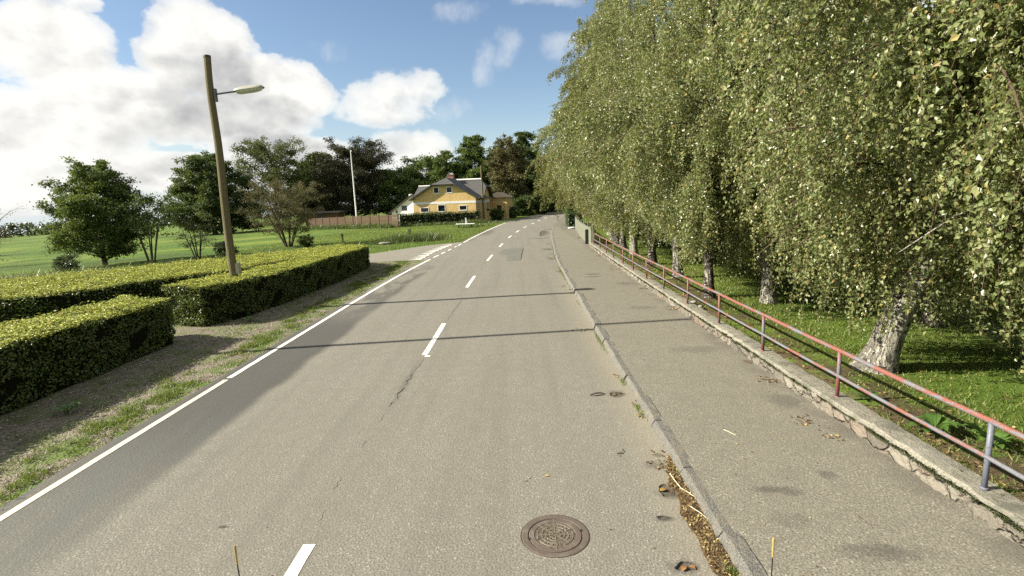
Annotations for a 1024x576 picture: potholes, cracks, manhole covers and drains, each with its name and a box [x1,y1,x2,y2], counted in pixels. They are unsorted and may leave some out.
manhole cover [521,515,590,558]
